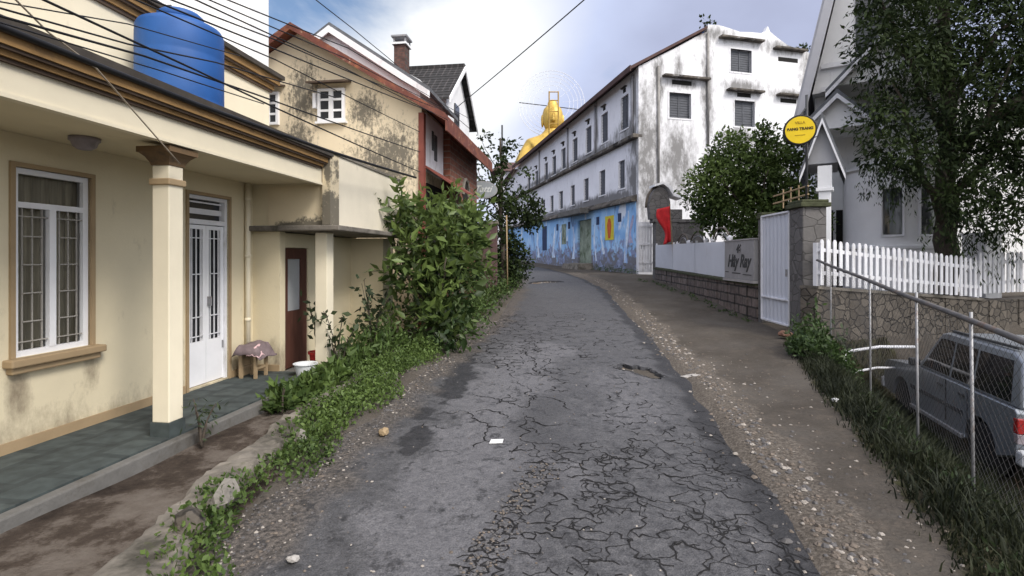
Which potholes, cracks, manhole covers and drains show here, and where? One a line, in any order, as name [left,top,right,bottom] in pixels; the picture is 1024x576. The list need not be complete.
crack [422,312,819,576]
pothole [613,363,668,379]
